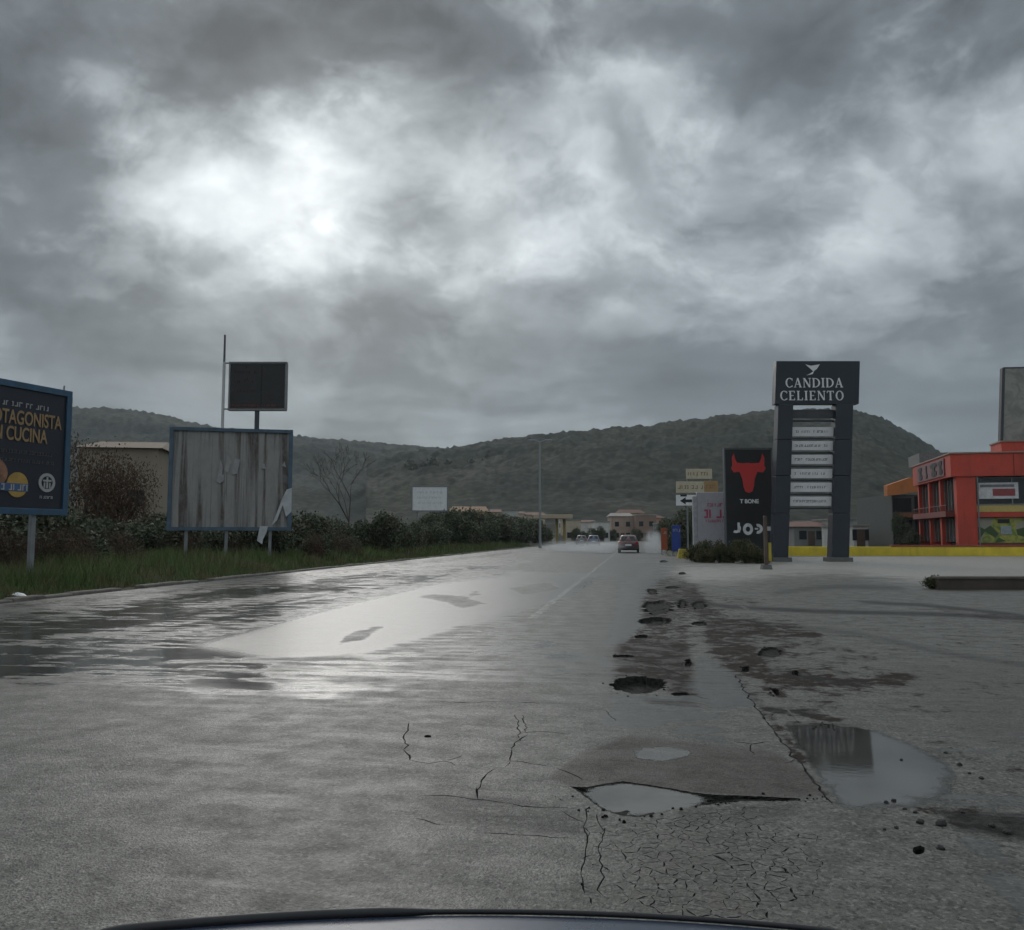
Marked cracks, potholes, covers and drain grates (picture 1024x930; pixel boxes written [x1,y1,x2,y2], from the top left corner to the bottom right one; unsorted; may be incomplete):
pothole [757,646,783,657]
pothole [555,781,828,823]
pothole [637,616,672,626]
pothole [641,600,675,615]
pothole [602,675,669,697]
pothole [690,600,707,609]
crack [403,700,823,920]
